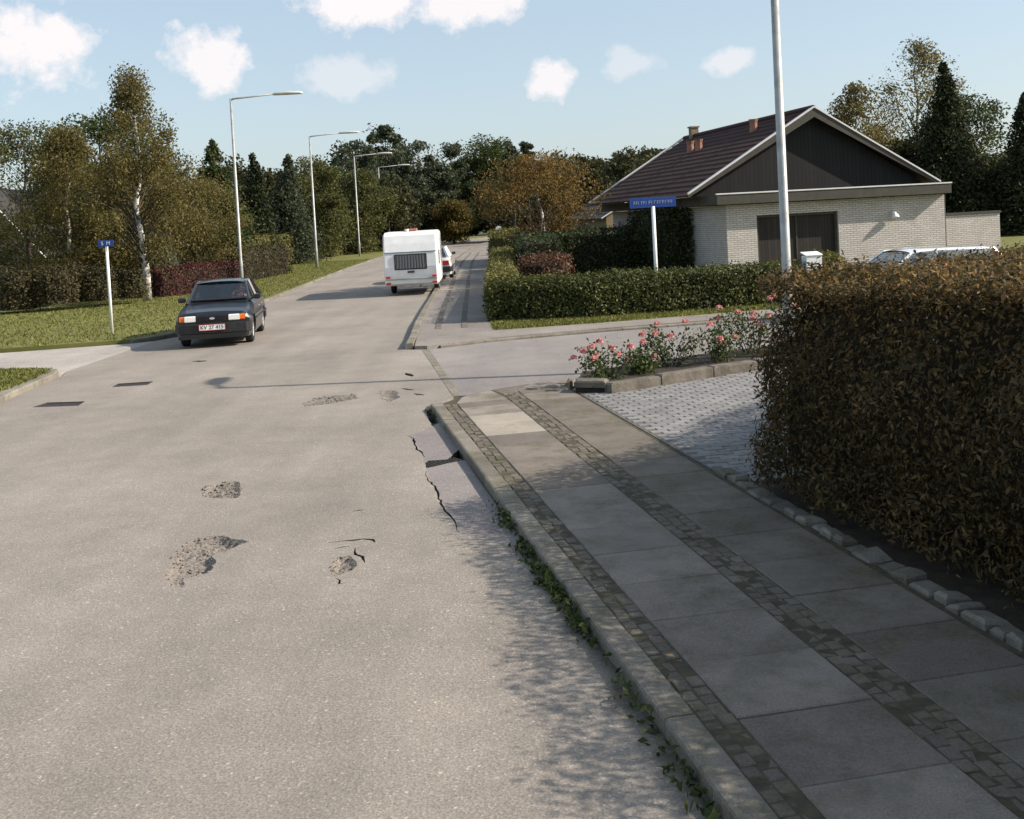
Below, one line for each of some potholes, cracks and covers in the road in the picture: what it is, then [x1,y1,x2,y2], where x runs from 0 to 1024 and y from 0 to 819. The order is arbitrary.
pothole [302,394,360,407]
crack [328,539,375,584]
pothole [329,555,357,576]
pothole [165,535,250,587]
crack [409,436,460,533]
pothole [376,390,400,402]
pothole [200,481,242,498]
